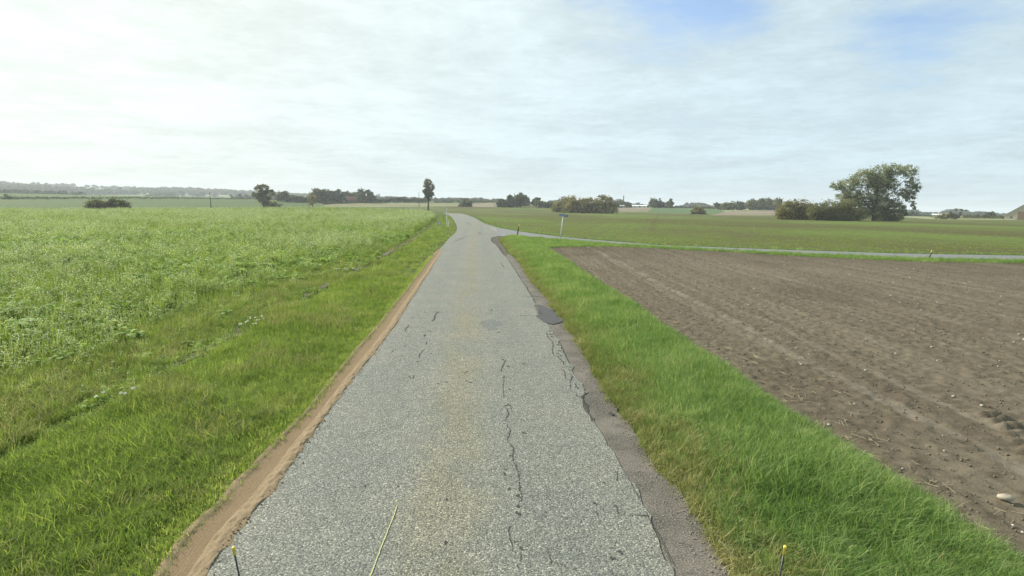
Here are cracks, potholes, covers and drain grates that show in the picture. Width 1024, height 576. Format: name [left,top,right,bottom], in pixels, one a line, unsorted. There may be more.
crack [546,332,594,422]
crack [501,360,522,501]
